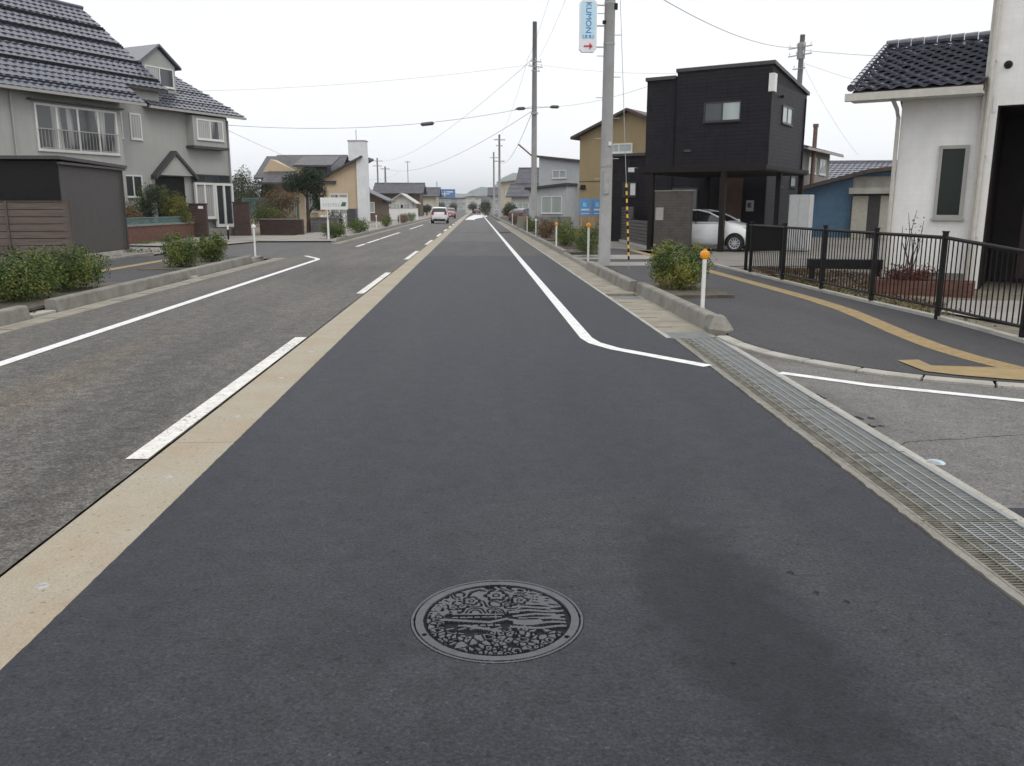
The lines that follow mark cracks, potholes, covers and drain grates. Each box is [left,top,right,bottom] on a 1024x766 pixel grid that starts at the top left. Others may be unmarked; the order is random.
manhole cover [411,580,584,664]
drain grate [731,377,832,409]
crack [890,434,1024,448]
drain grate [678,338,745,356]
drain grate [773,408,904,453]
drain grate [923,520,1024,597]
drain grate [832,452,1016,522]
drain grate [701,355,781,378]
